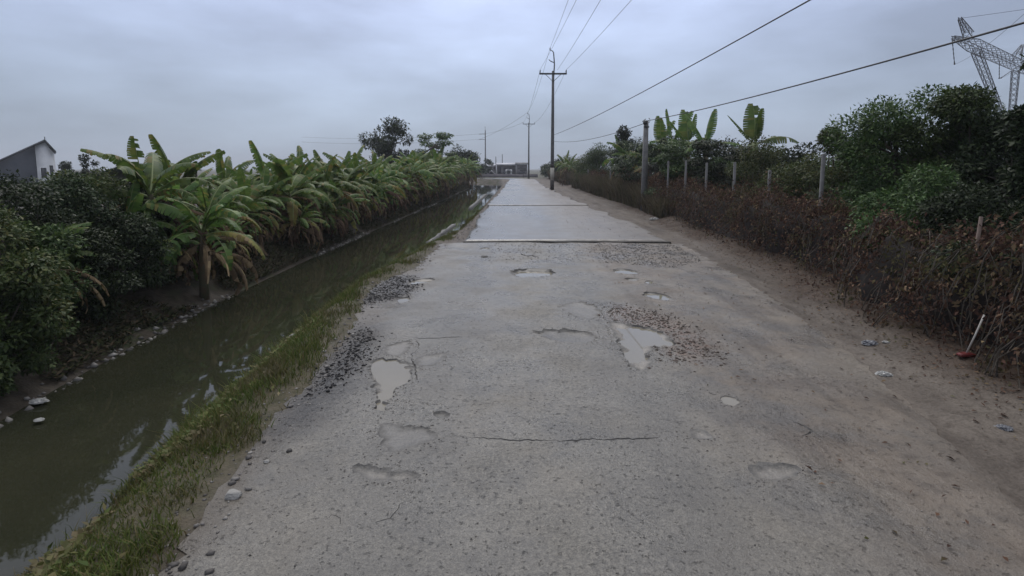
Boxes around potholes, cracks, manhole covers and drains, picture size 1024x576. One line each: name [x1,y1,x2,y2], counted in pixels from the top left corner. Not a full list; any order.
pothole [367,357,415,413]
pothole [720,396,740,406]
pothole [609,322,676,370]
pothole [748,461,801,480]
pothole [532,328,601,343]
crack [405,337,449,380]
pothole [510,268,556,277]
pothole [352,463,421,482]
pothole [378,423,438,452]
pothole [642,292,676,301]
